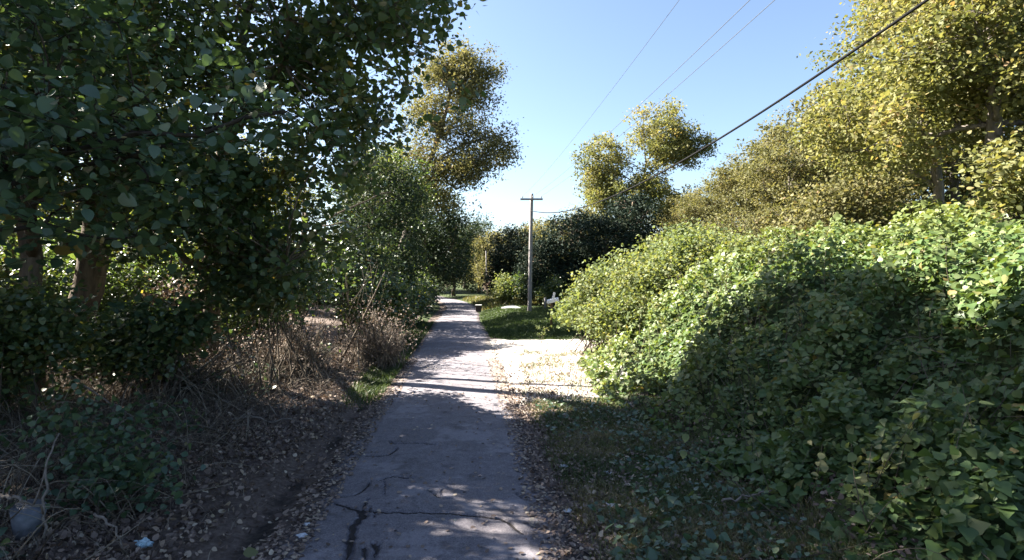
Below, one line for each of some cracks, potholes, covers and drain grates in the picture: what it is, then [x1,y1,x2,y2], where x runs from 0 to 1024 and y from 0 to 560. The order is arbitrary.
crack [336,476,524,560]
